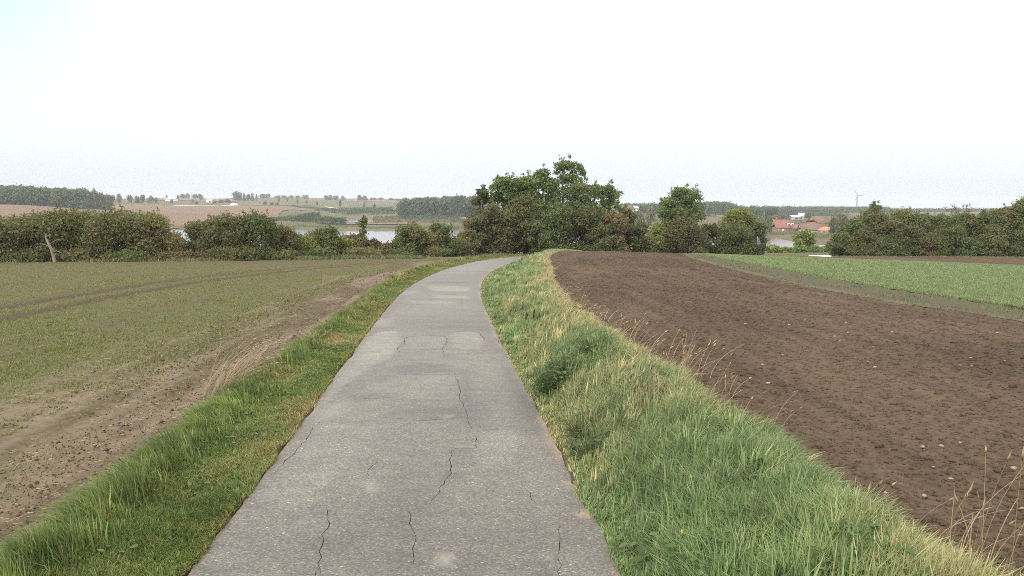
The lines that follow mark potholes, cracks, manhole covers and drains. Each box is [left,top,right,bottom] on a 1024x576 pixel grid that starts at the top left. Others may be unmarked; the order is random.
crack [393,380,494,504]
crack [315,510,330,575]
